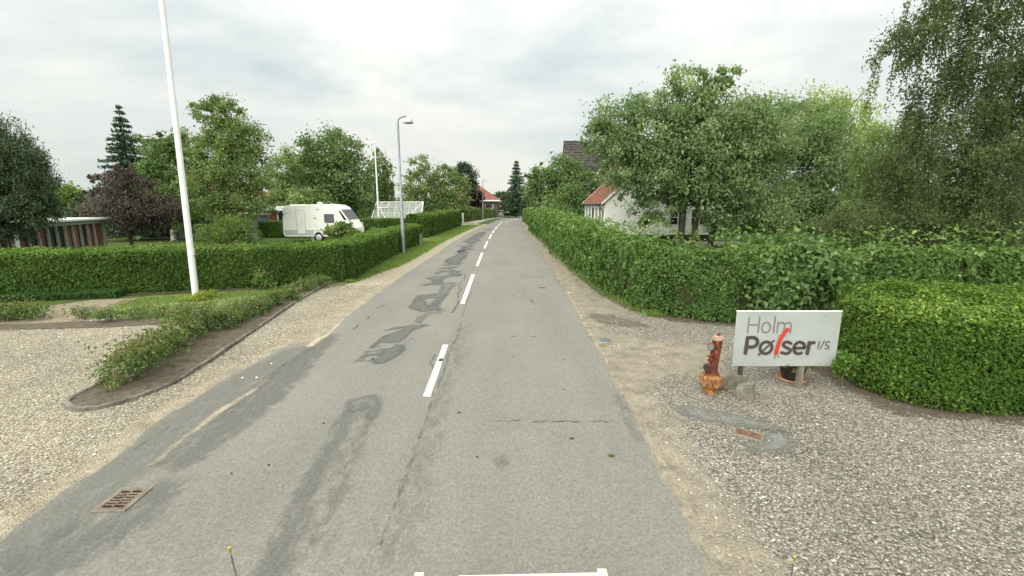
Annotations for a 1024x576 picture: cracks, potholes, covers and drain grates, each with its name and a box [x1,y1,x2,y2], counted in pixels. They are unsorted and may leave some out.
drain grate [732,427,765,442]
drain grate [90,487,153,513]
